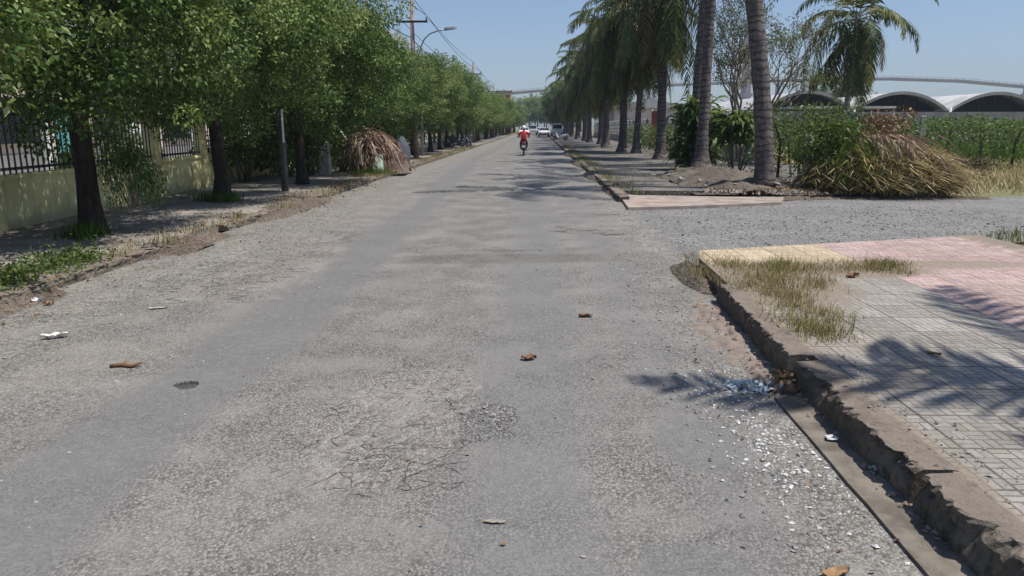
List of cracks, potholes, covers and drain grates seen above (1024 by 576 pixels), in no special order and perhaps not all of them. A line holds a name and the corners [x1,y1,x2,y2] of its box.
pothole [422,396,536,449]
crack [270,364,475,496]
